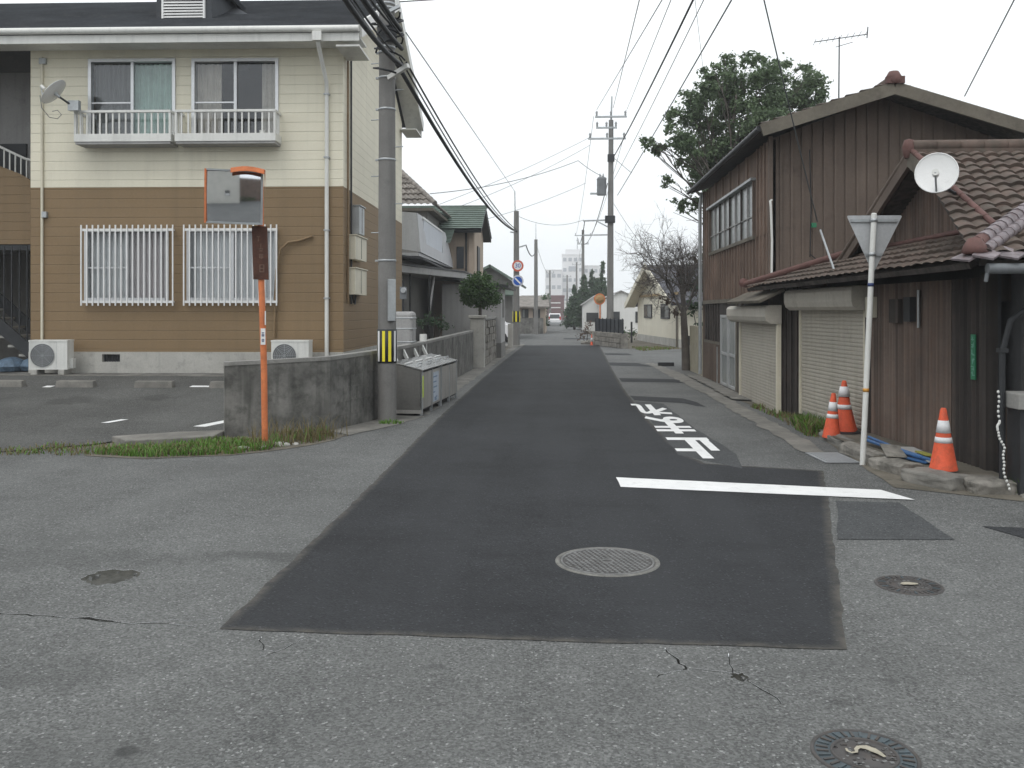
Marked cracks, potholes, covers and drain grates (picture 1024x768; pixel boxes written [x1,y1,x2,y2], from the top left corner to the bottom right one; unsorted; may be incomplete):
manhole cover [810,729,922,768]
pothole [80,569,140,585]
manhole cover [555,547,660,577]
crack [640,648,782,704]
manhole cover [874,575,945,596]
